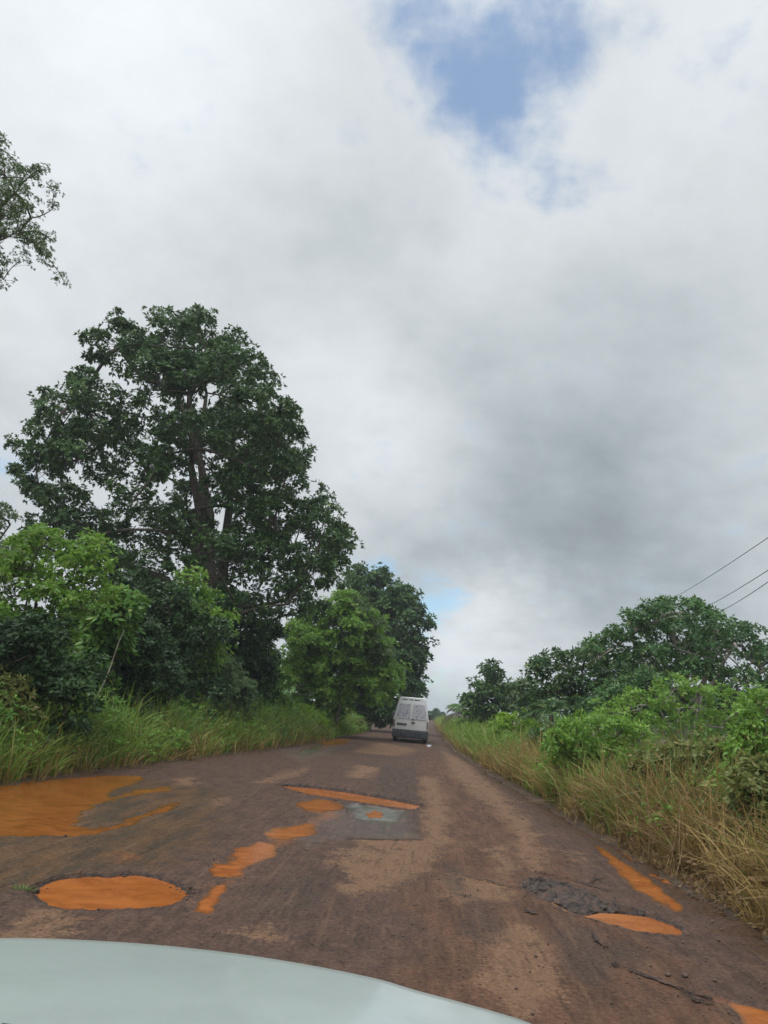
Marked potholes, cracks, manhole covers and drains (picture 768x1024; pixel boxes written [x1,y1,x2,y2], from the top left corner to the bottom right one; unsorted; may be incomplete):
pothole [275,782,425,811]
pothole [517,876,691,937]
crack [592,933,715,1004]
pothole [28,871,196,911]
